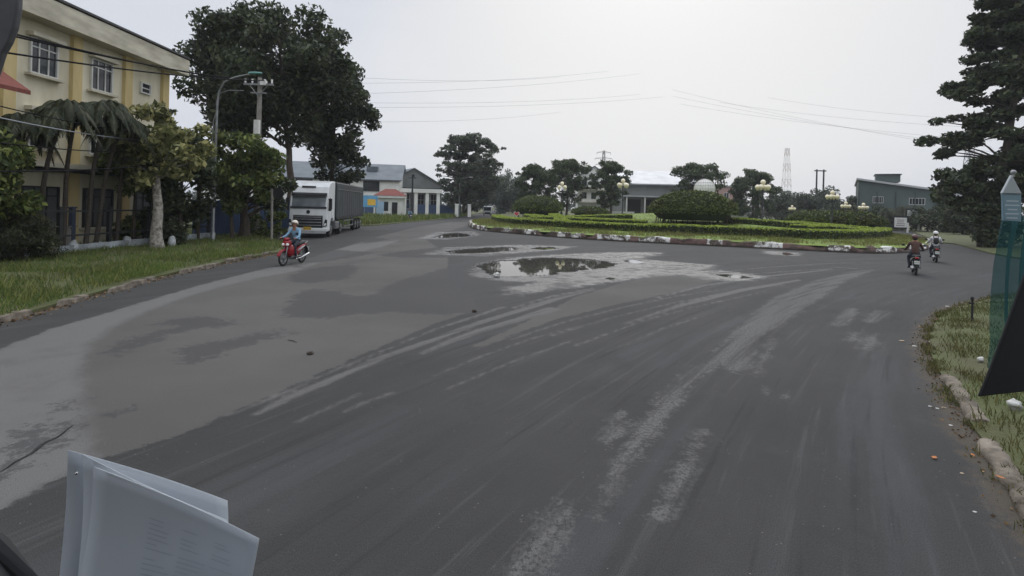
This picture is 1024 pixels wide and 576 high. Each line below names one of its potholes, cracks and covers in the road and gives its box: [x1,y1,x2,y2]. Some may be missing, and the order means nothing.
crack [1,425,73,472]
pothole [476,257,618,277]
